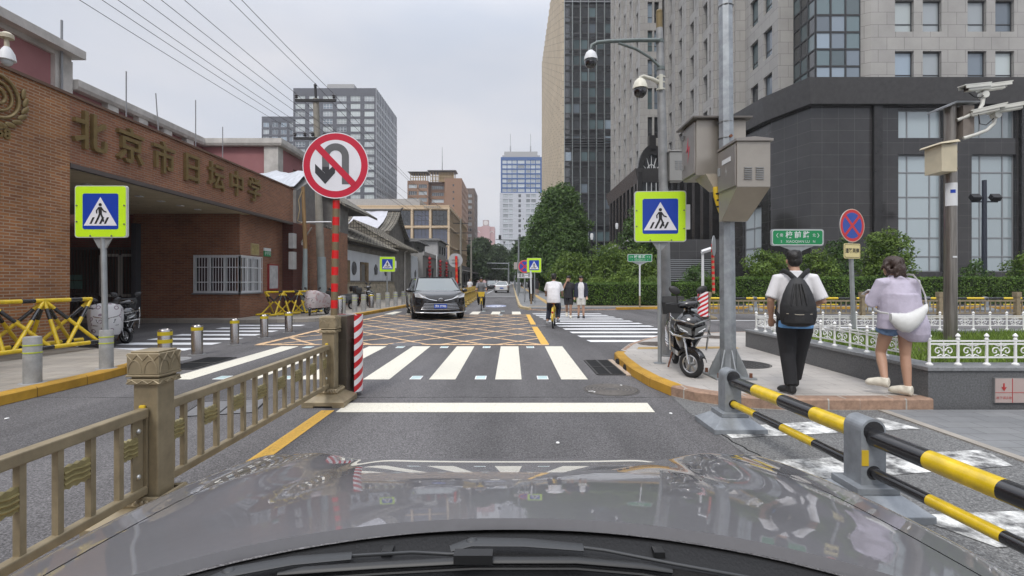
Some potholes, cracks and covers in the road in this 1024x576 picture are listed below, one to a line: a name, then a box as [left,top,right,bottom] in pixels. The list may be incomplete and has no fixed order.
manhole cover [583,384,640,396]
drain grate [180,357,237,370]
drain grate [584,360,626,375]
manhole cover [712,360,772,369]
